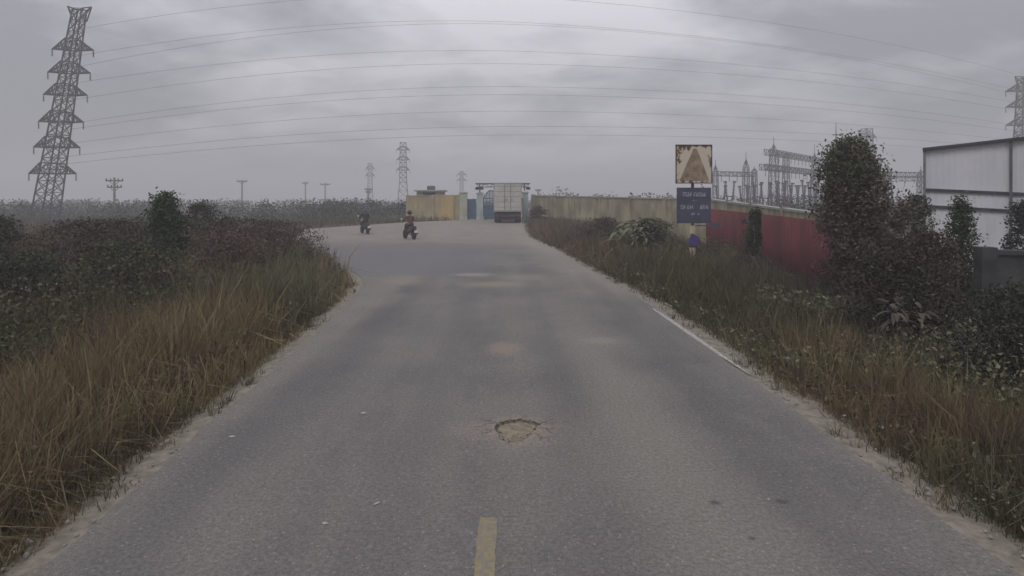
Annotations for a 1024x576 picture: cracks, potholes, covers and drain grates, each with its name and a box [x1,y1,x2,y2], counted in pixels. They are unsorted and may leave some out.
pothole [494,419,541,442]
